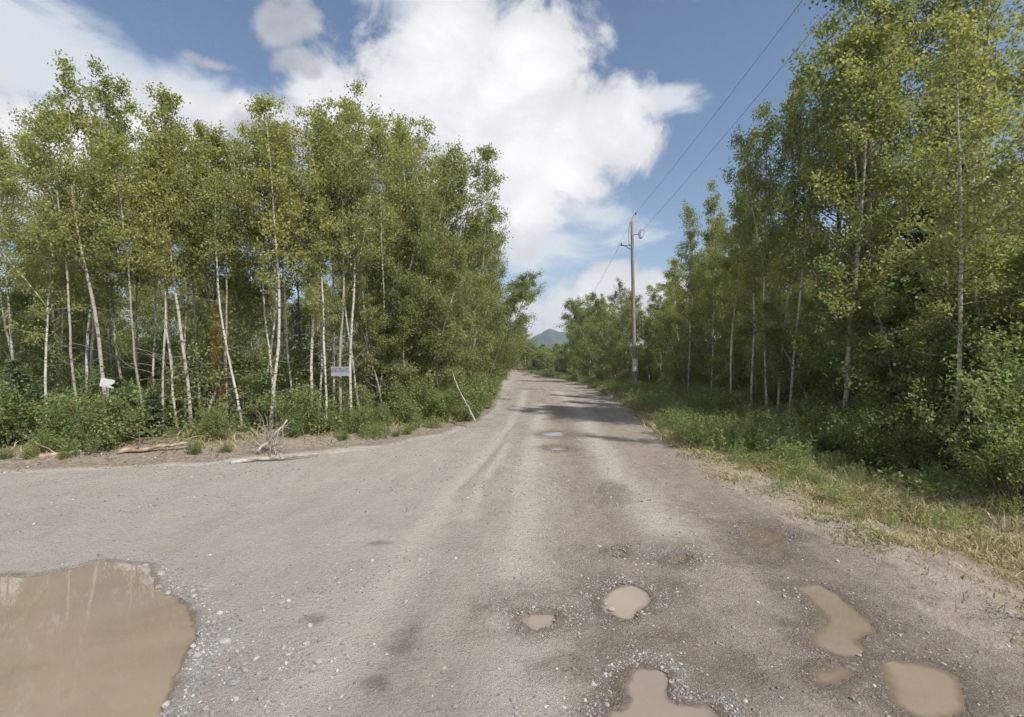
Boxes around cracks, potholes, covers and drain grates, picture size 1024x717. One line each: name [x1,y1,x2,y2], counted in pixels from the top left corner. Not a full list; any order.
pothole [799,656,873,694]
pothole [508,606,570,636]
pothole [598,544,638,560]
pothole [728,521,804,556]
pothole [591,579,662,624]
pothole [783,580,894,665]
pothole [0,558,209,717]
pothole [657,550,706,569]
pothole [589,660,733,717]
pothole [859,650,991,717]
